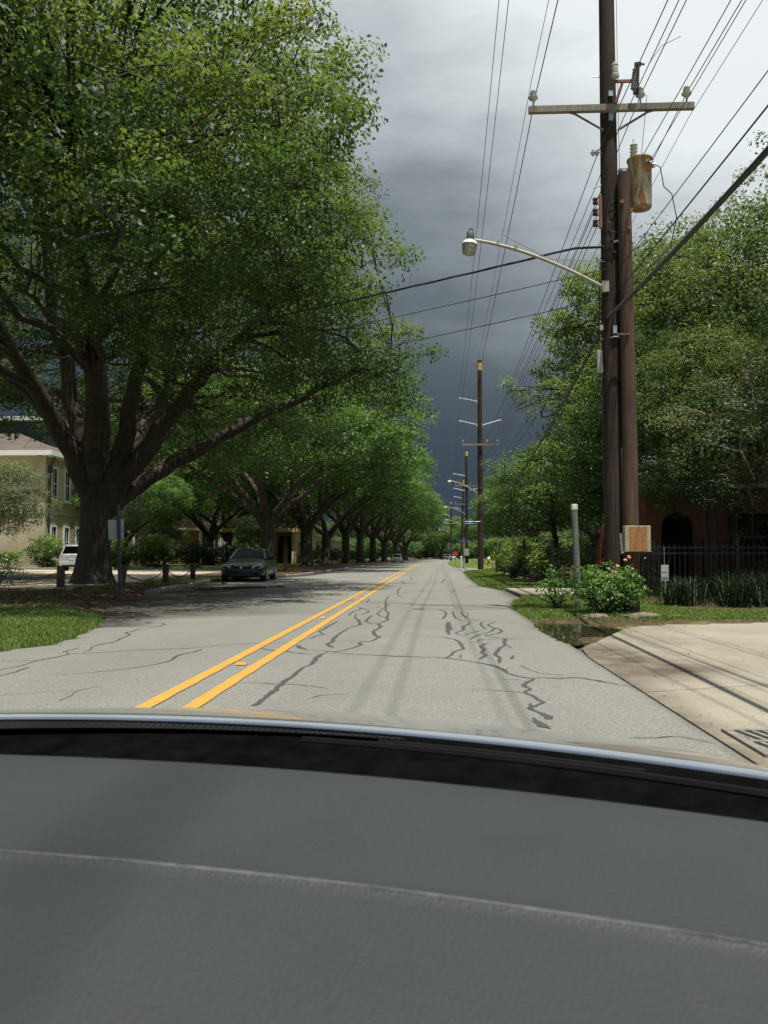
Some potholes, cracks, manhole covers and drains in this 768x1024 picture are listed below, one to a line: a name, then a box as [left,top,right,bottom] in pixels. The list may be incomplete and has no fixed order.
drain grate [721,728,768,758]
crack [0,577,630,728]
